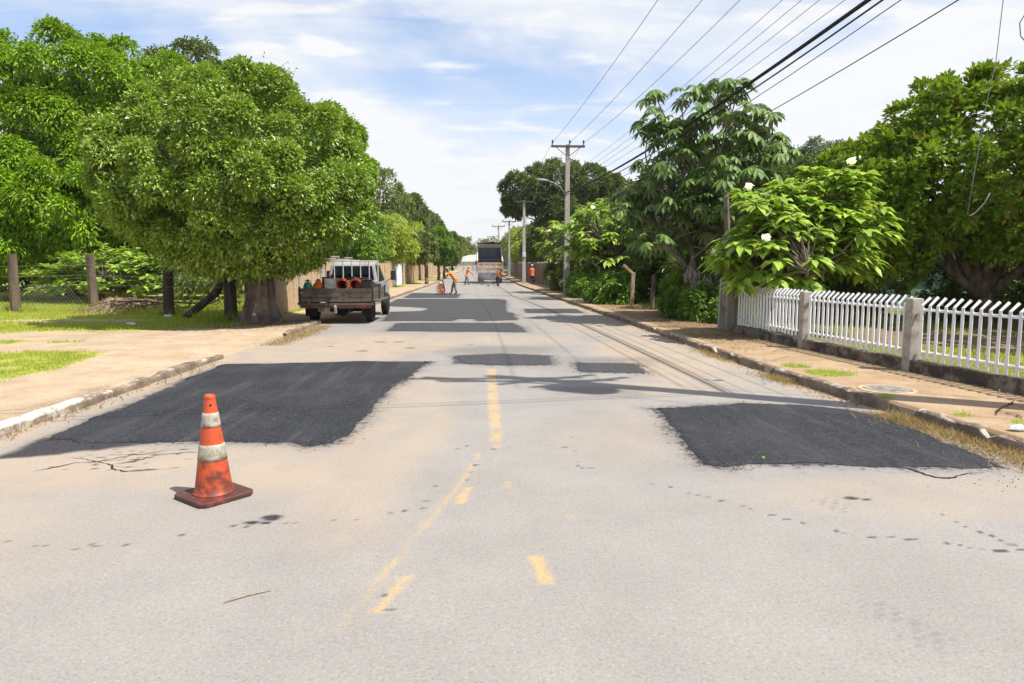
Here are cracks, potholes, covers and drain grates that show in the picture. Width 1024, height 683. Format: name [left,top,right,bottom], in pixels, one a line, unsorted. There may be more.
manhole cover [857,384,918,394]
crack [894,466,983,478]
crack [36,450,195,471]
